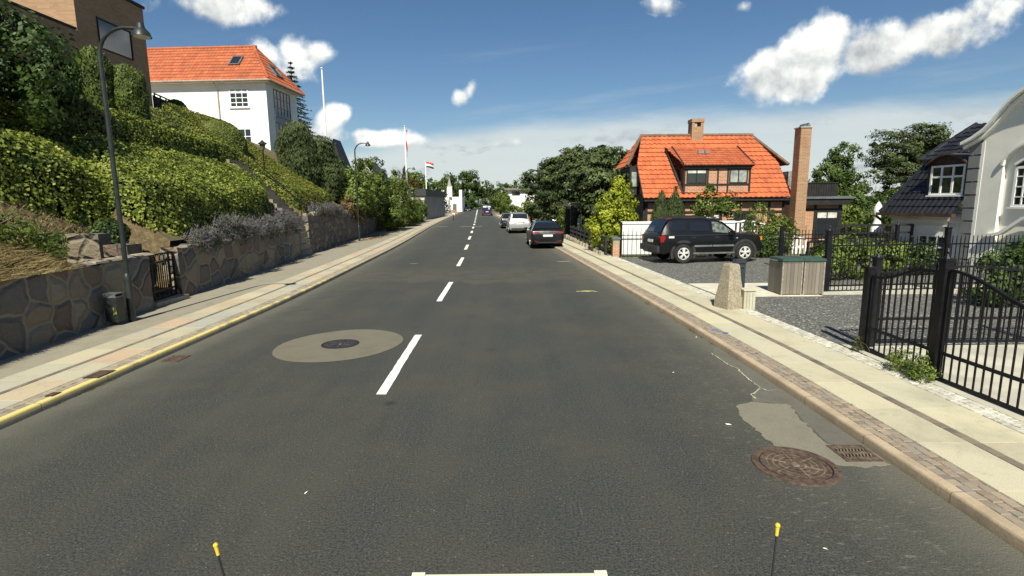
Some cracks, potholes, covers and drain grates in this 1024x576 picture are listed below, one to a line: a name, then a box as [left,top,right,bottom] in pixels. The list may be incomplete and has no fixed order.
manhole cover [751,446,842,487]
crack [712,354,770,399]
drain grate [826,445,884,462]
